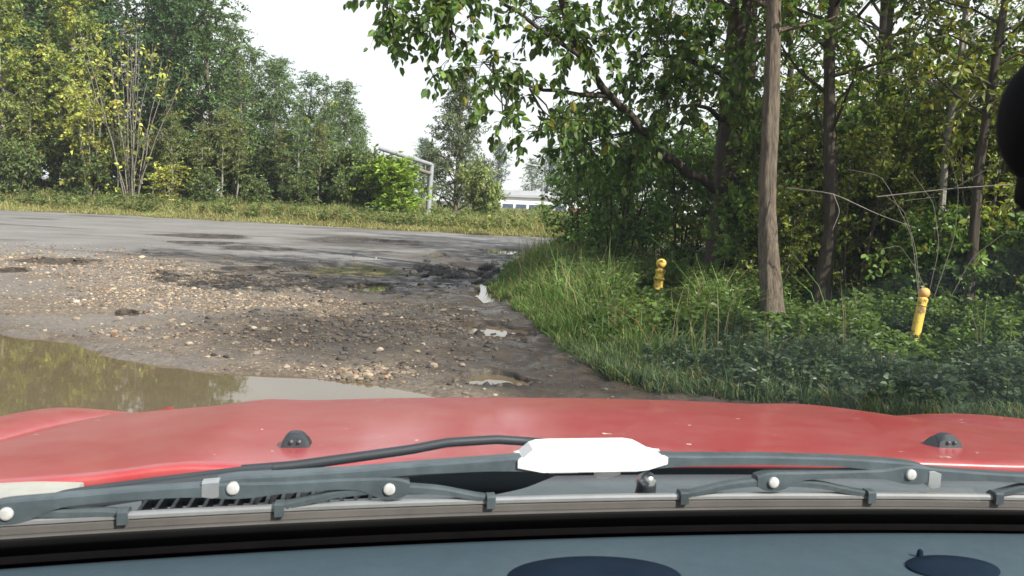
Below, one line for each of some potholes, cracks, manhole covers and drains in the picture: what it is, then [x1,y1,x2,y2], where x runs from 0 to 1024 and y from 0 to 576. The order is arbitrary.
pothole [431,262,489,279]
pothole [470,278,500,305]
pothole [0,324,496,416]
pothole [451,367,543,385]
pothole [463,319,540,339]
pothole [345,283,393,294]
